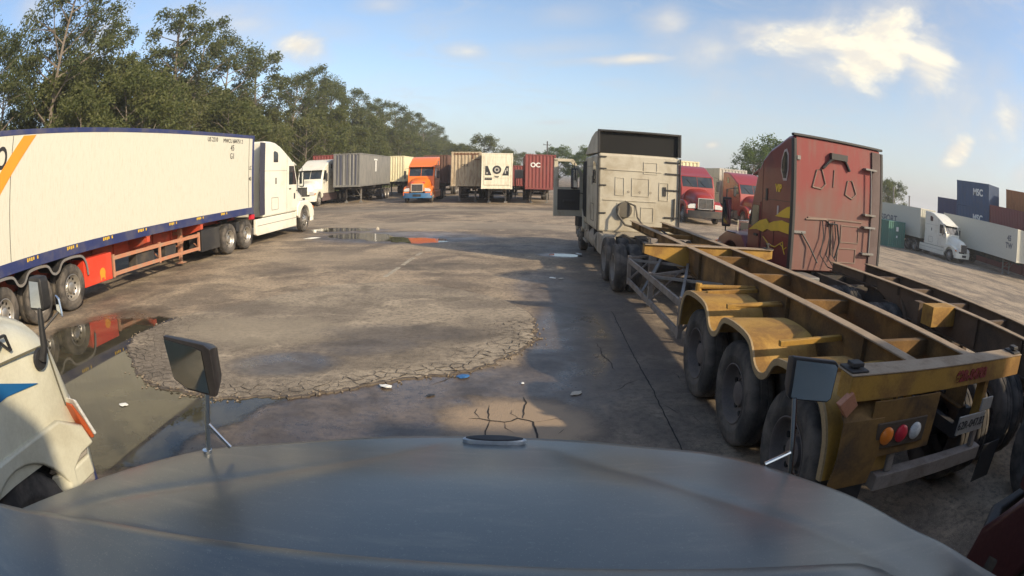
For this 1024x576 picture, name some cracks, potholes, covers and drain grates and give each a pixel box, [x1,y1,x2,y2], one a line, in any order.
crack [127,316,537,396]
crack [595,312,700,450]
crack [470,397,563,438]
